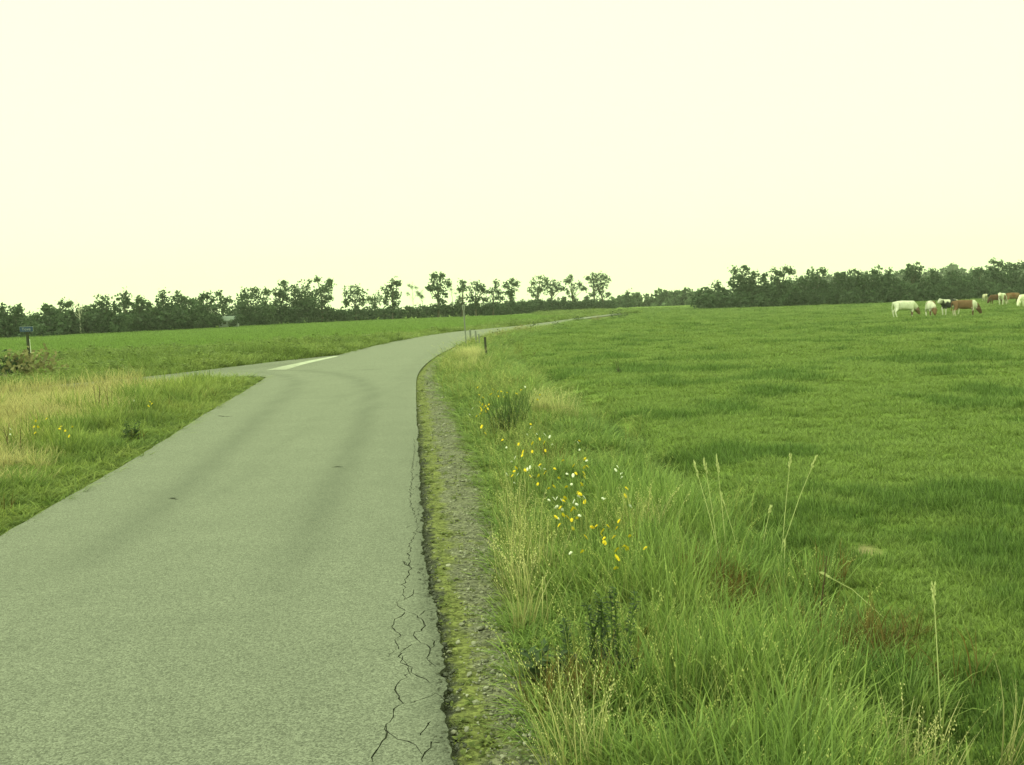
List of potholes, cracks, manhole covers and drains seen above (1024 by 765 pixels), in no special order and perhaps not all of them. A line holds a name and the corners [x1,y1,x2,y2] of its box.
crack [371,447,444,762]
